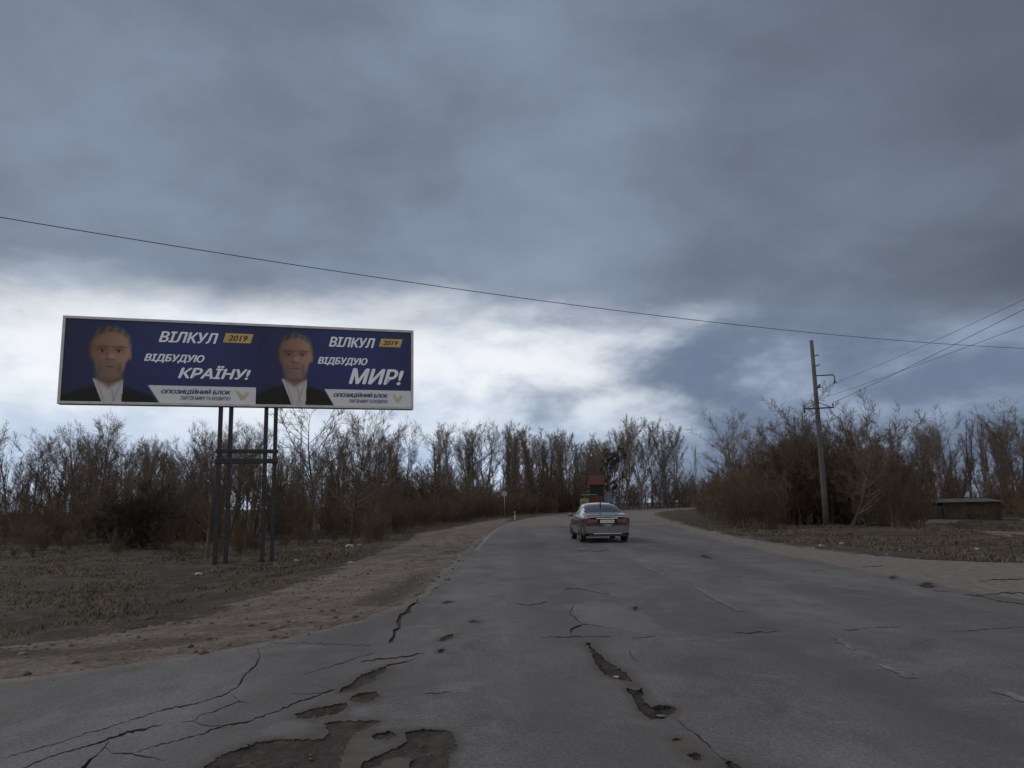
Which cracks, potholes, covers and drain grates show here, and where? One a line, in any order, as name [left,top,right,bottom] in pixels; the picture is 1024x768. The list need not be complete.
pothole [295,702,348,719]
crack [541,588,655,660]
pothole [204,720,381,768]
pothole [339,666,387,692]
pothole [361,729,458,768]
pothole [350,692,379,703]
crack [933,578,1024,605]
crack [5,599,422,768]
pothole [627,688,676,719]
pothole [586,643,632,682]
crack [675,717,733,768]
